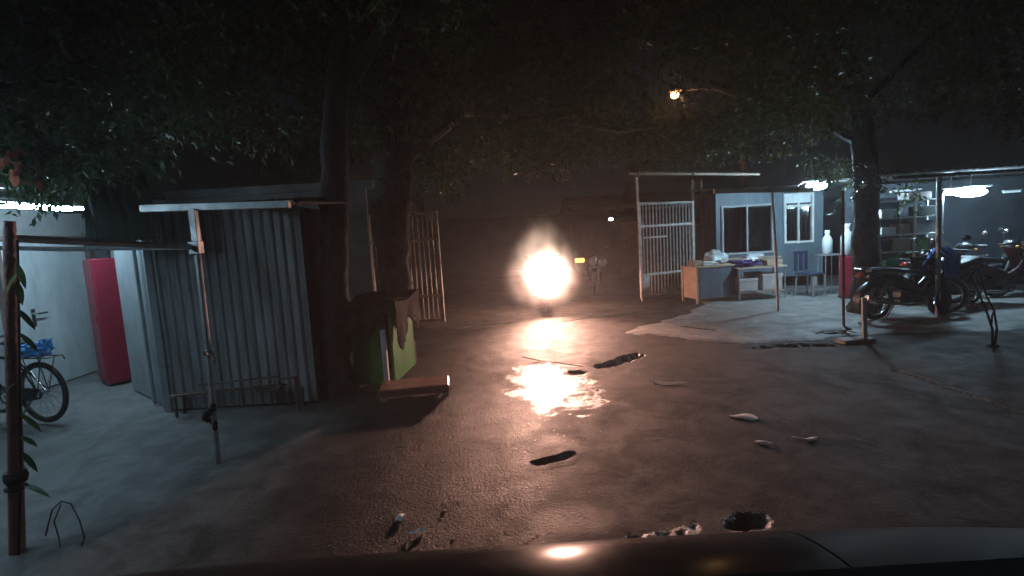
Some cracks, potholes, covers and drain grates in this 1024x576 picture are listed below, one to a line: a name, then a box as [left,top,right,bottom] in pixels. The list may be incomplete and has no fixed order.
pothole [554,367,598,378]
pothole [603,514,715,540]
pothole [708,504,790,533]
pothole [519,446,587,470]
crack [881,368,1024,420]
pothole [581,351,653,372]
